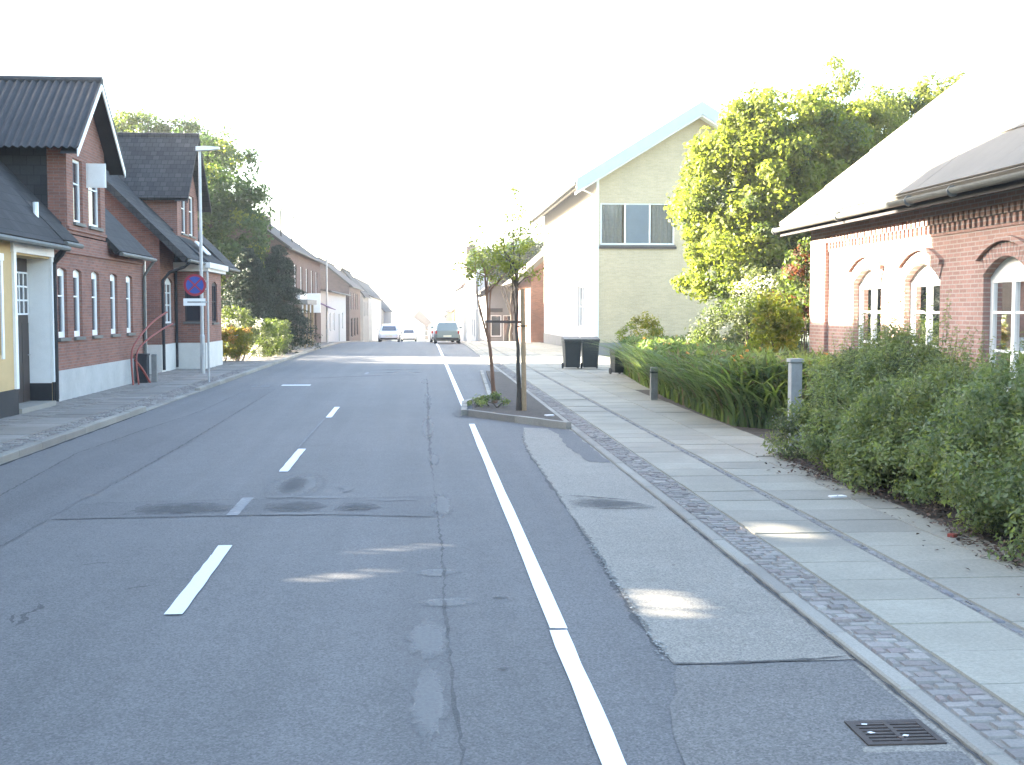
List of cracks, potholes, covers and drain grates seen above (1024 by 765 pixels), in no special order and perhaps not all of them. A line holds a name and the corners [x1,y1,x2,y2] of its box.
drain grate [844,719,947,746]
